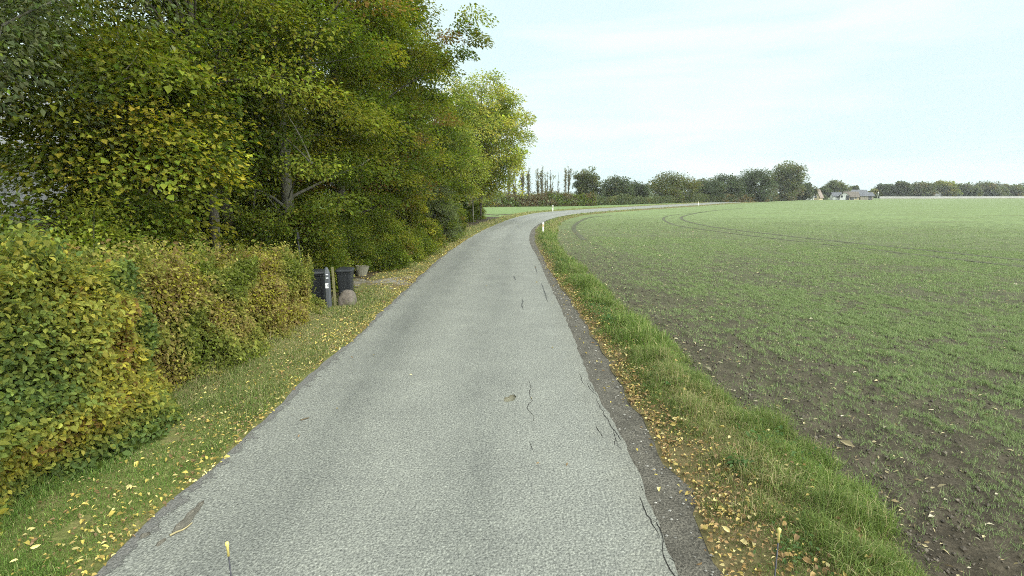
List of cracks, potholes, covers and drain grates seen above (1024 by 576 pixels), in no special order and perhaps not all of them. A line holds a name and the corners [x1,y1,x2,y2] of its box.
crack [640,486,675,576]
crack [579,374,621,447]
